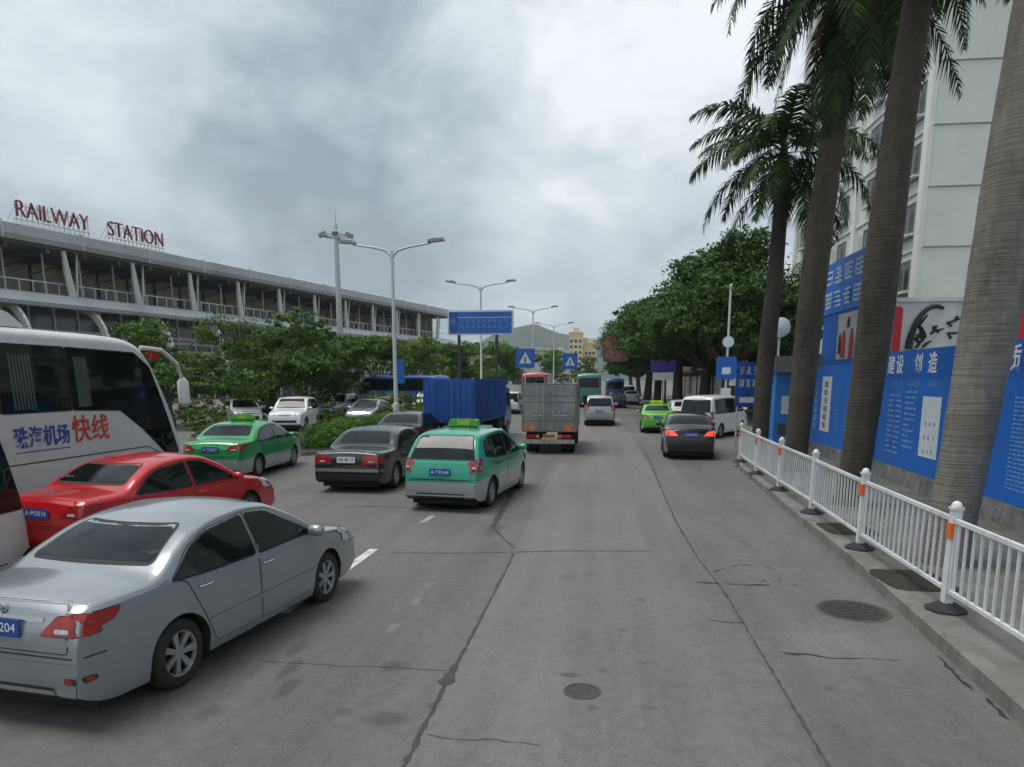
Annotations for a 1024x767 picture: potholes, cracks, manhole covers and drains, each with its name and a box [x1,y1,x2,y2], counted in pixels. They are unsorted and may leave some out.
manhole cover [814,600,893,623]
manhole cover [563,683,601,699]
crack [937,655,1010,720]
crack [782,652,904,661]
crack [425,733,540,745]
